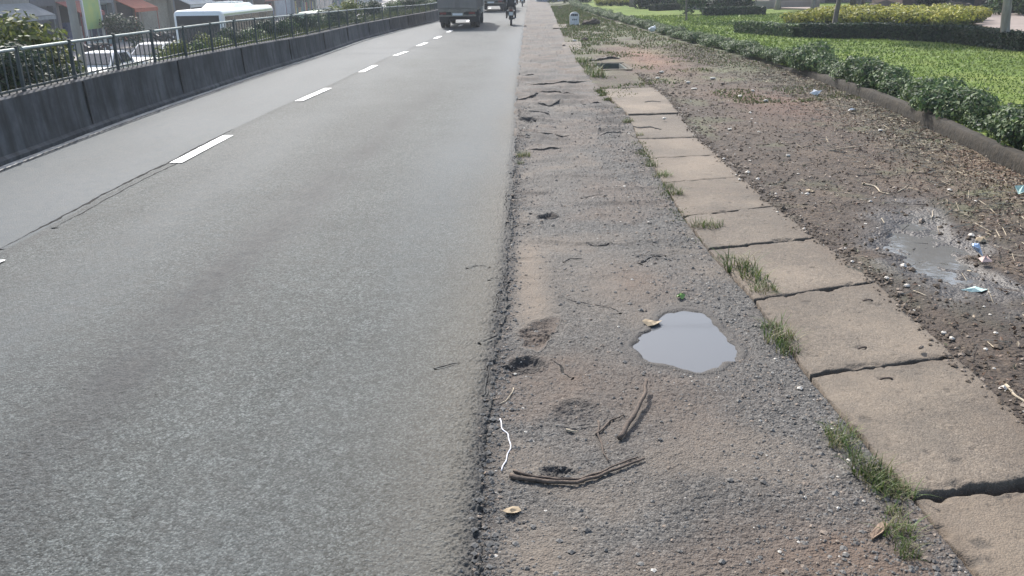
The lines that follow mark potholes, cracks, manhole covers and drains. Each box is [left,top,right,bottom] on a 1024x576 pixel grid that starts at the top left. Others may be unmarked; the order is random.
crack [517,73,604,151]
pothole [515,314,562,353]
pothole [535,211,560,220]
pothole [625,306,748,375]
pothole [496,354,549,375]
pothole [537,464,575,478]
pothole [546,397,609,430]
